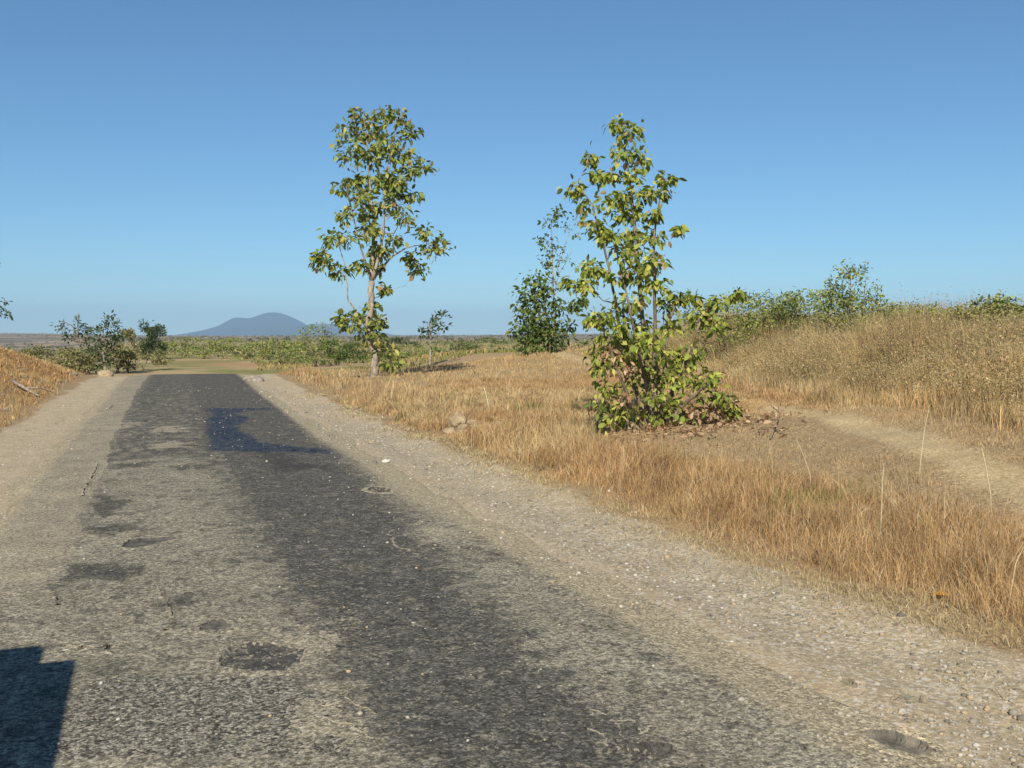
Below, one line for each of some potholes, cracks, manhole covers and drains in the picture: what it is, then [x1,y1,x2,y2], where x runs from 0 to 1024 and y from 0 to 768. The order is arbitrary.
pothole [361,486,398,494]
crack [46,588,63,605]
pothole [205,639,317,677]
pothole [185,617,244,635]
pothole [113,535,185,550]
crack [156,587,178,630]
crack [81,462,100,496]
pothole [849,724,955,763]
